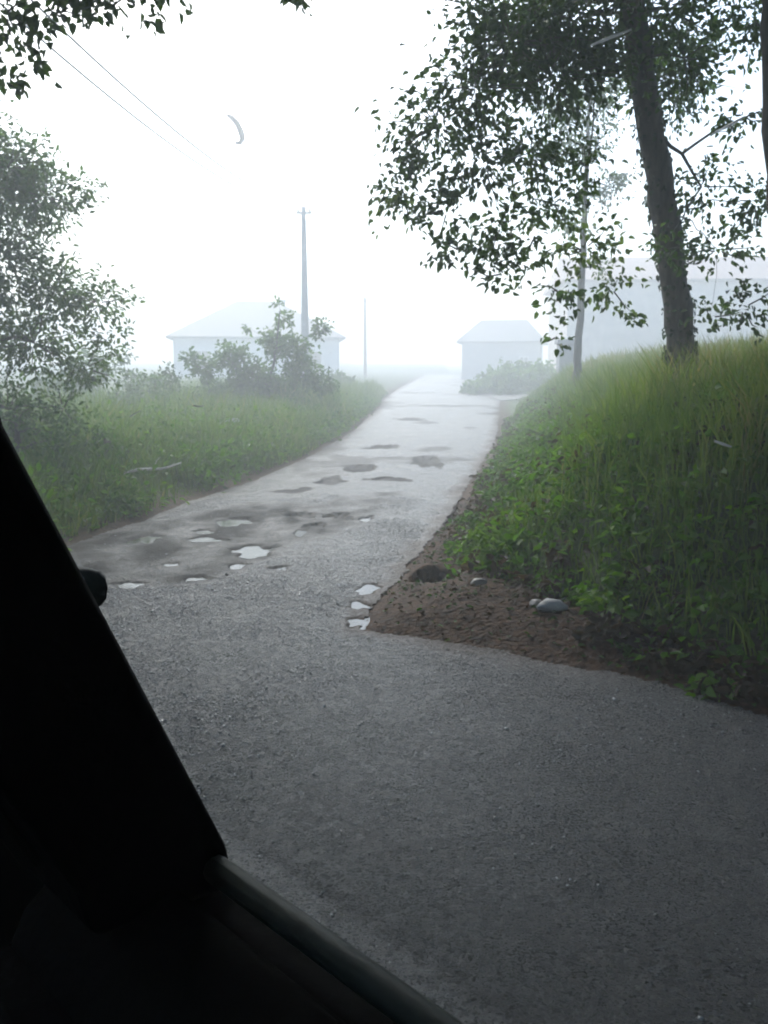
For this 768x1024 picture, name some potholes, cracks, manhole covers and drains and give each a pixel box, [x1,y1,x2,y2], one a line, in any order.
pothole [354,584,381,595]
pothole [214,515,257,527]
pothole [351,601,370,609]
pothole [412,455,444,469]
pothole [313,475,348,485]
pothole [342,464,377,473]
pothole [347,616,373,630]
pothole [229,543,280,560]
